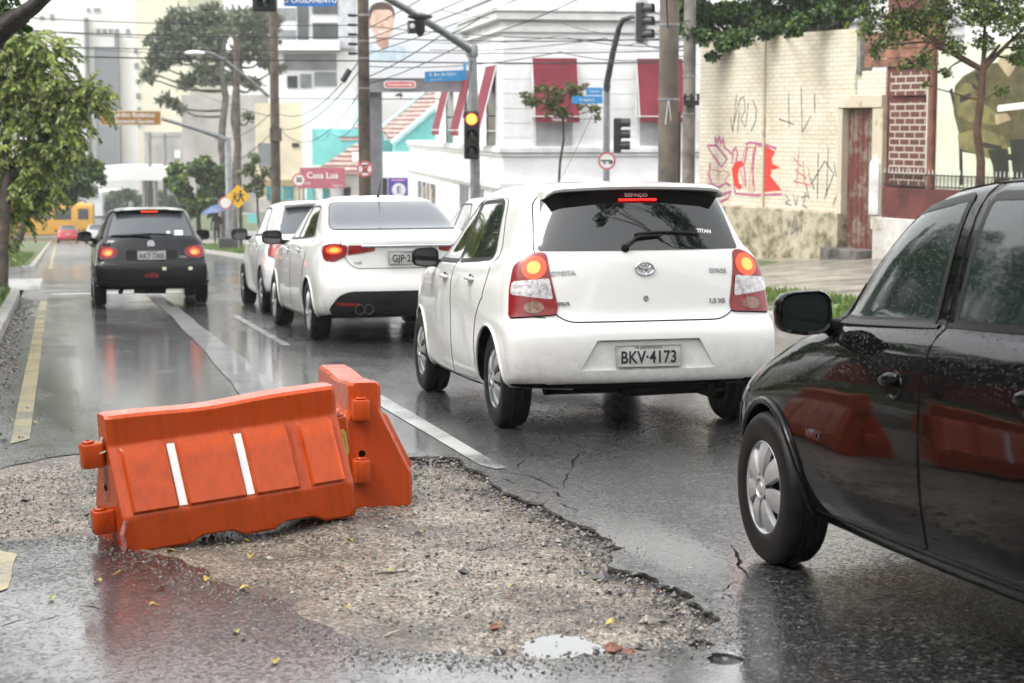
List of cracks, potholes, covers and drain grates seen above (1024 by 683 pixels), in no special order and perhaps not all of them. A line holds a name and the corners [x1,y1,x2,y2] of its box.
pothole [706,653,744,665]
crack [723,545,749,598]
crack [500,452,595,512]
pothole [0,453,721,659]
